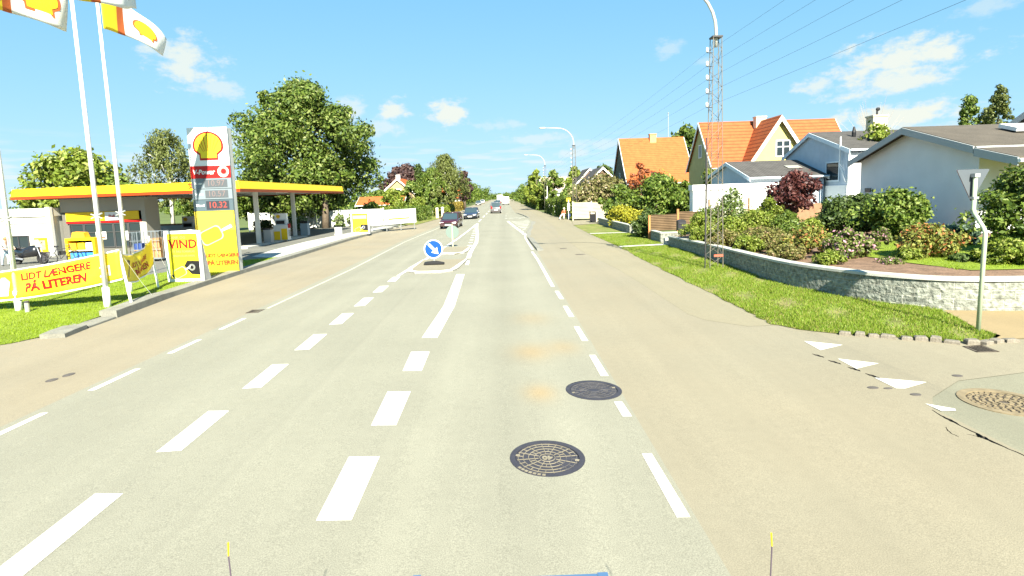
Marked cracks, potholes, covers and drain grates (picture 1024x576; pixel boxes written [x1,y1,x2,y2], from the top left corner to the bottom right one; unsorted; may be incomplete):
manhole cover [510,440,585,477]
manhole cover [566,381,622,400]
crack [933,410,1024,456]
manhole cover [956,388,1024,417]
